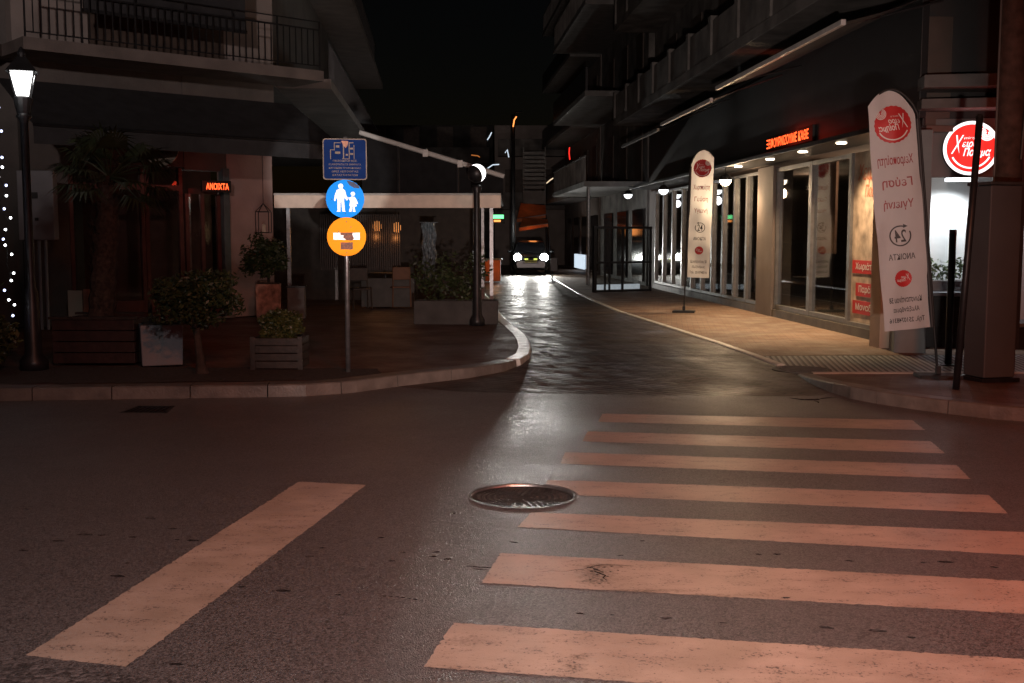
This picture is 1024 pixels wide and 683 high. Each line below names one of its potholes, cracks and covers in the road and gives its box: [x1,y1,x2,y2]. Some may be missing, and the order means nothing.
manhole cover [468,483,577,509]
crack [543,565,628,584]
